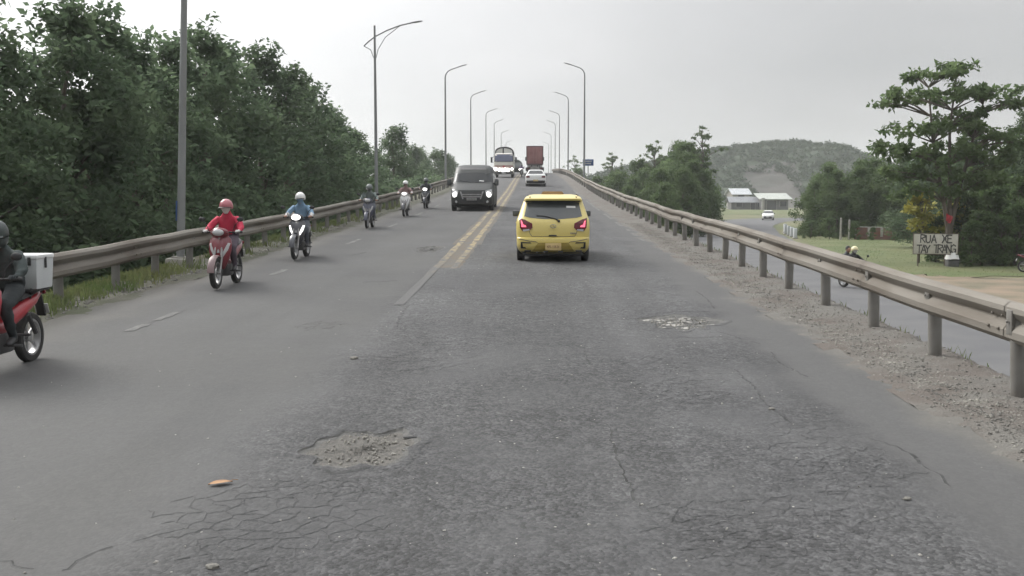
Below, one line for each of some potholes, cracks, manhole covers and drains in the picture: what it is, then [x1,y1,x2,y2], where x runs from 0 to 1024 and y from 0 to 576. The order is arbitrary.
crack [135,467,396,573]
pothole [281,425,434,472]
pothole [630,313,732,333]
crack [62,546,113,571]
crack [583,356,930,568]
